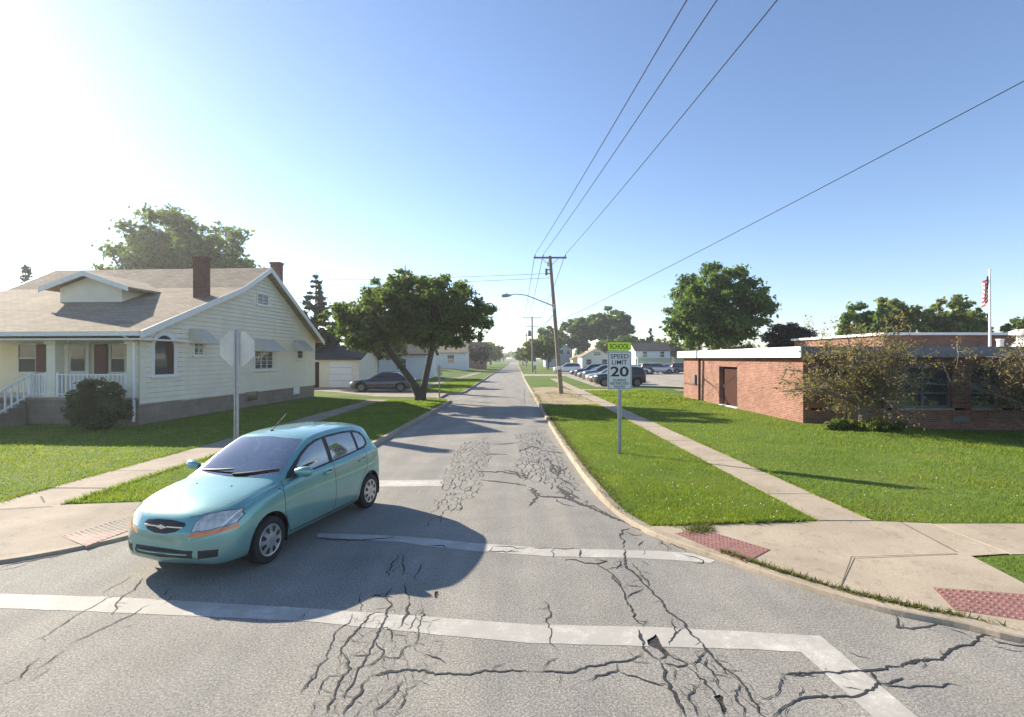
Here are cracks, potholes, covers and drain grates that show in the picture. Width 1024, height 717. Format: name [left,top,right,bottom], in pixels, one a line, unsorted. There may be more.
crack [300,430,1024,717]
pothole [647,635,671,656]
crack [1,577,180,685]
